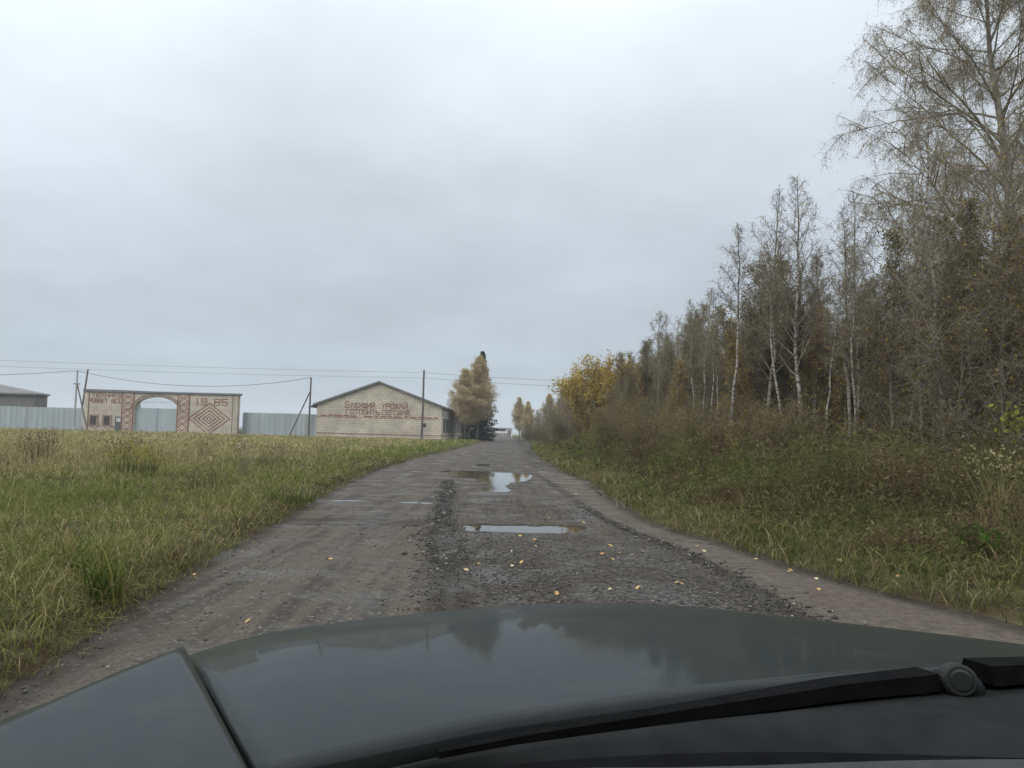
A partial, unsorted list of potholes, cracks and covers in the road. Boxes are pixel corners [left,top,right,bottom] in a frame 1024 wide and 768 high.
pothole [439,470,534,491]
